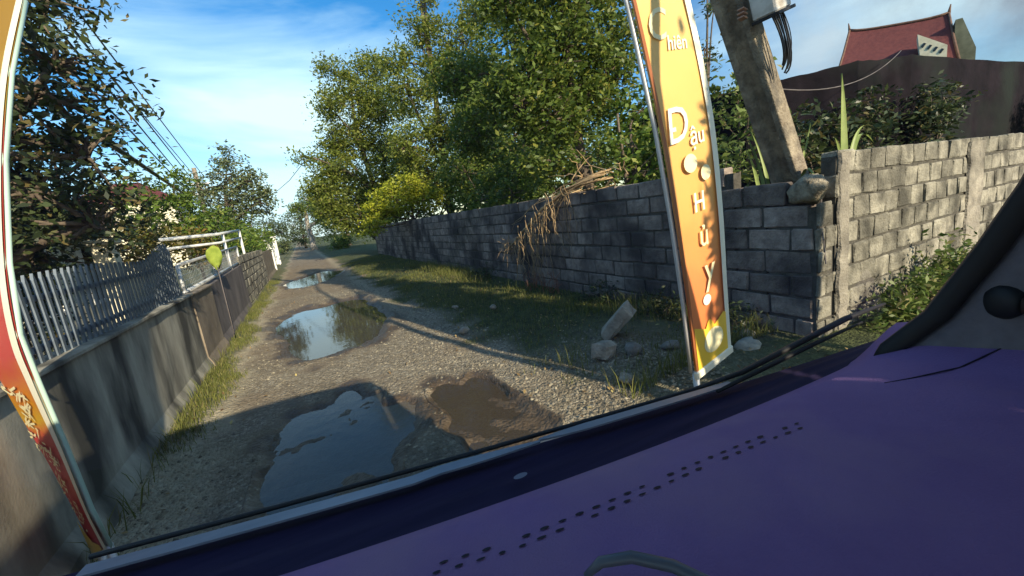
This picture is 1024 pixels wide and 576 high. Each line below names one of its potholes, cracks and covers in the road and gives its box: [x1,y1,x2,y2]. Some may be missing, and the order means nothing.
pothole [265,294,397,366]
pothole [241,381,431,521]
pothole [276,267,350,290]
pothole [424,369,566,458]
